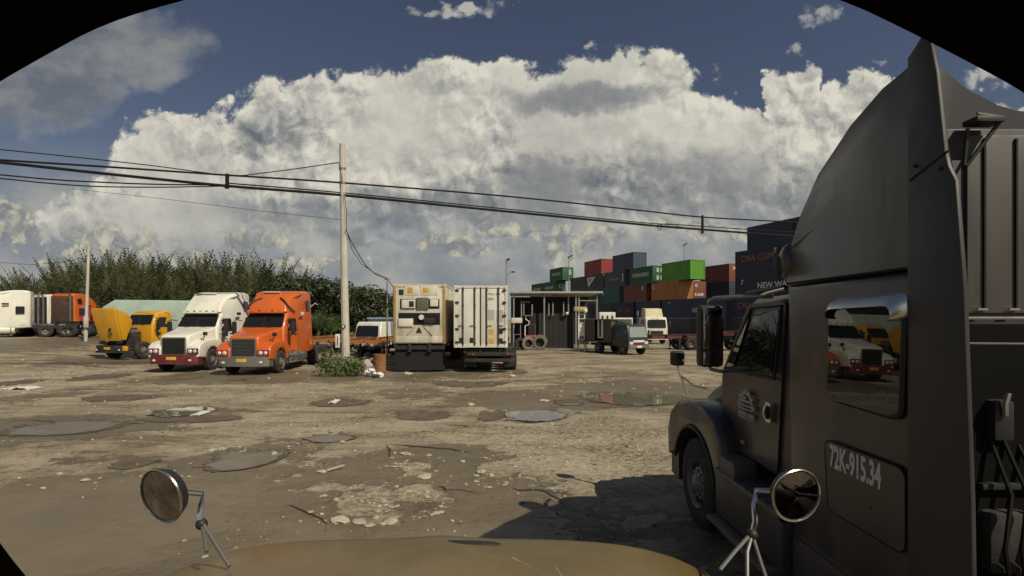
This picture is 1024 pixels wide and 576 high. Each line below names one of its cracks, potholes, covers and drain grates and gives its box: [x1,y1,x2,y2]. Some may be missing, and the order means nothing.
pothole [309,398,371,406]
pothole [394,409,450,421]
pothole [135,414,243,422]
crack [386,444,468,456]
pothole [81,394,164,402]
pothole [303,431,359,443]
pothole [108,456,162,470]
pothole [197,447,290,472]
pothole [146,405,226,418]
crack [514,488,570,500]
crack [290,505,328,524]
pothole [477,410,507,422]
